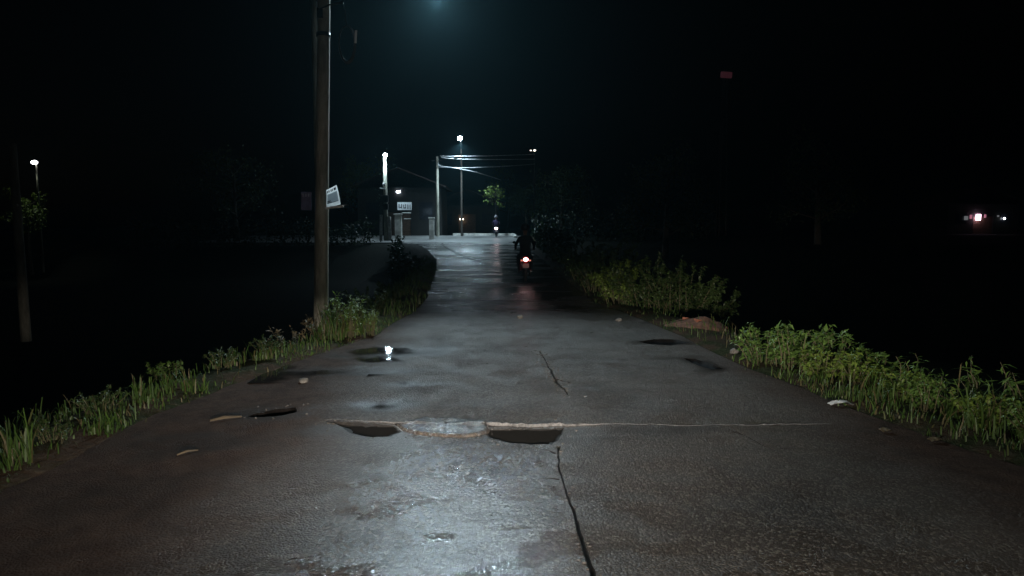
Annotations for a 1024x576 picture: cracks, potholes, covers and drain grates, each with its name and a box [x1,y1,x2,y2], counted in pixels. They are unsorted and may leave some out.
crack [534,350,588,397]
pothole [315,420,417,440]
crack [541,446,602,576]
pothole [244,403,310,419]
pothole [477,419,578,446]
